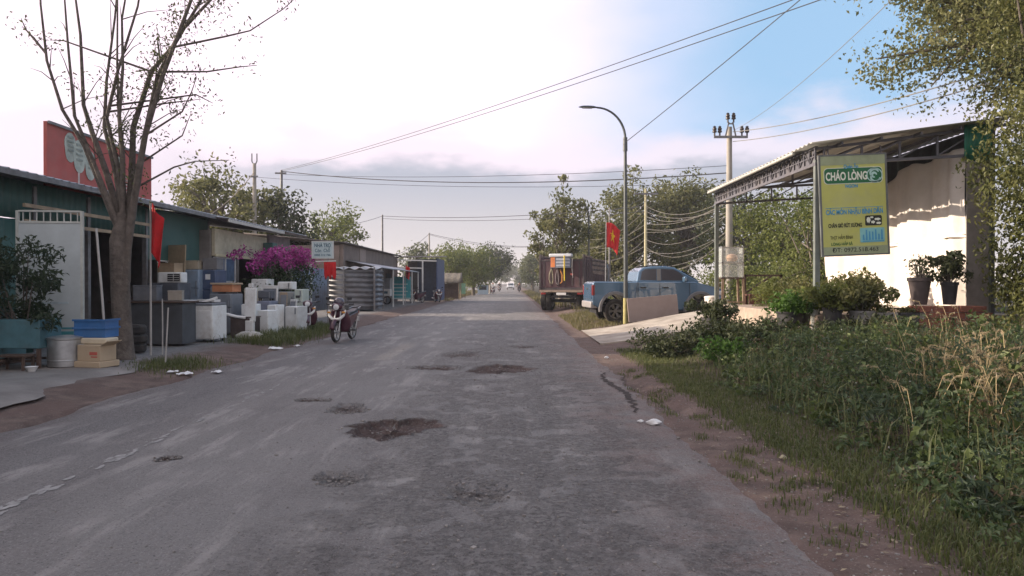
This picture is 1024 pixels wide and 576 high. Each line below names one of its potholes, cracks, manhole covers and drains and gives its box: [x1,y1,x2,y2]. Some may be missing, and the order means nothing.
pothole [336,416,449,443]
pothole [311,470,369,487]
pothole [433,481,522,507]
pothole [435,350,486,358]
pothole [464,364,540,375]
pothole [319,402,371,415]
crack [600,372,639,413]
